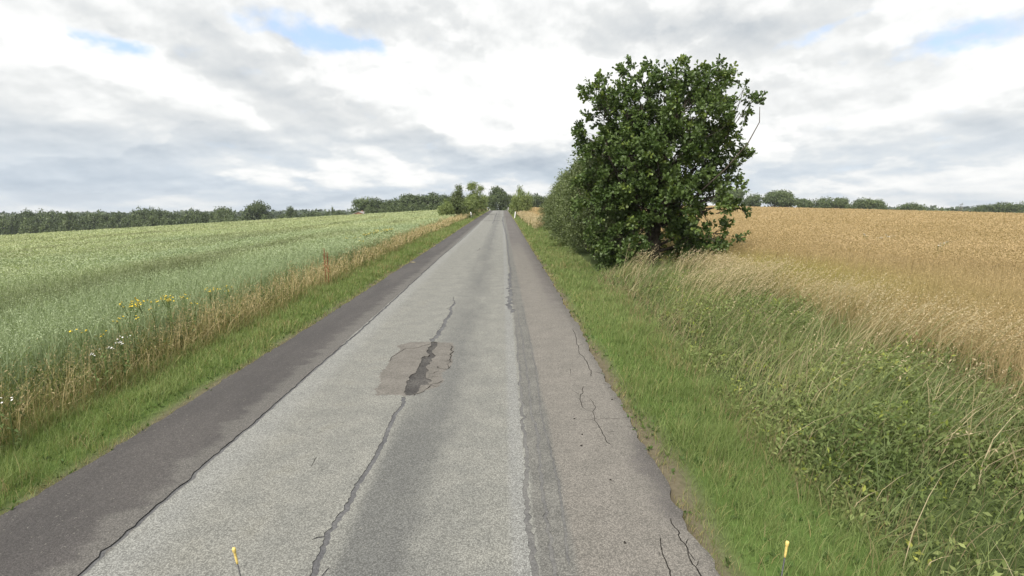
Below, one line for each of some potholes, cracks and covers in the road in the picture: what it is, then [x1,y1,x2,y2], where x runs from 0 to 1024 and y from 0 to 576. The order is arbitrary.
crack [658,519,702,576]
crack [310,297,456,576]
crack [516,305,635,576]
